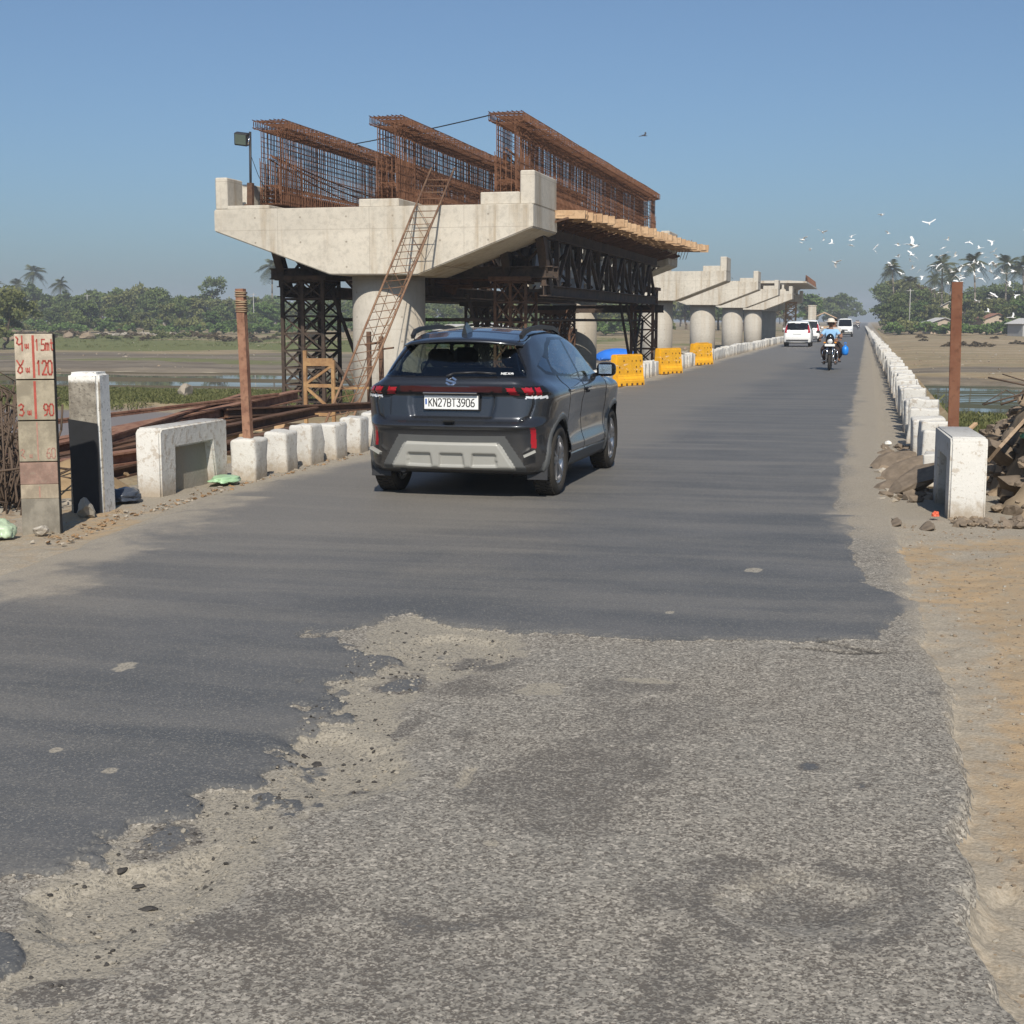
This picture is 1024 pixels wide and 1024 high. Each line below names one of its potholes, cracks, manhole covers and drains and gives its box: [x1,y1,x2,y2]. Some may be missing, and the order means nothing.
pothole [15,841,235,948]
pothole [390,634,513,672]
pothole [269,723,416,800]
crack [793,638,889,655]
